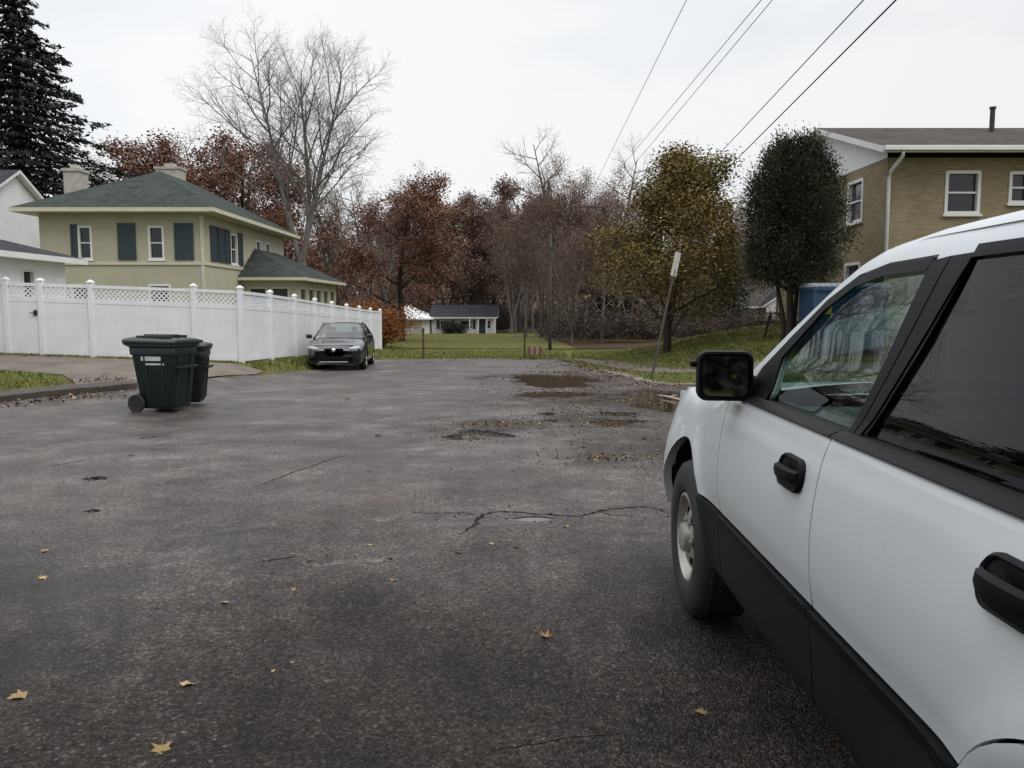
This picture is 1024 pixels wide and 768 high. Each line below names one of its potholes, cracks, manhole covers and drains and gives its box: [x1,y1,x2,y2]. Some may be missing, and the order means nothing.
crack [257,455,346,487]
pothole [606,387,681,415]
crack [358,506,671,535]
pothole [498,373,624,390]
pothole [429,427,530,443]
pothole [513,514,558,522]
pothole [589,418,657,427]
crack [489,734,609,751]
